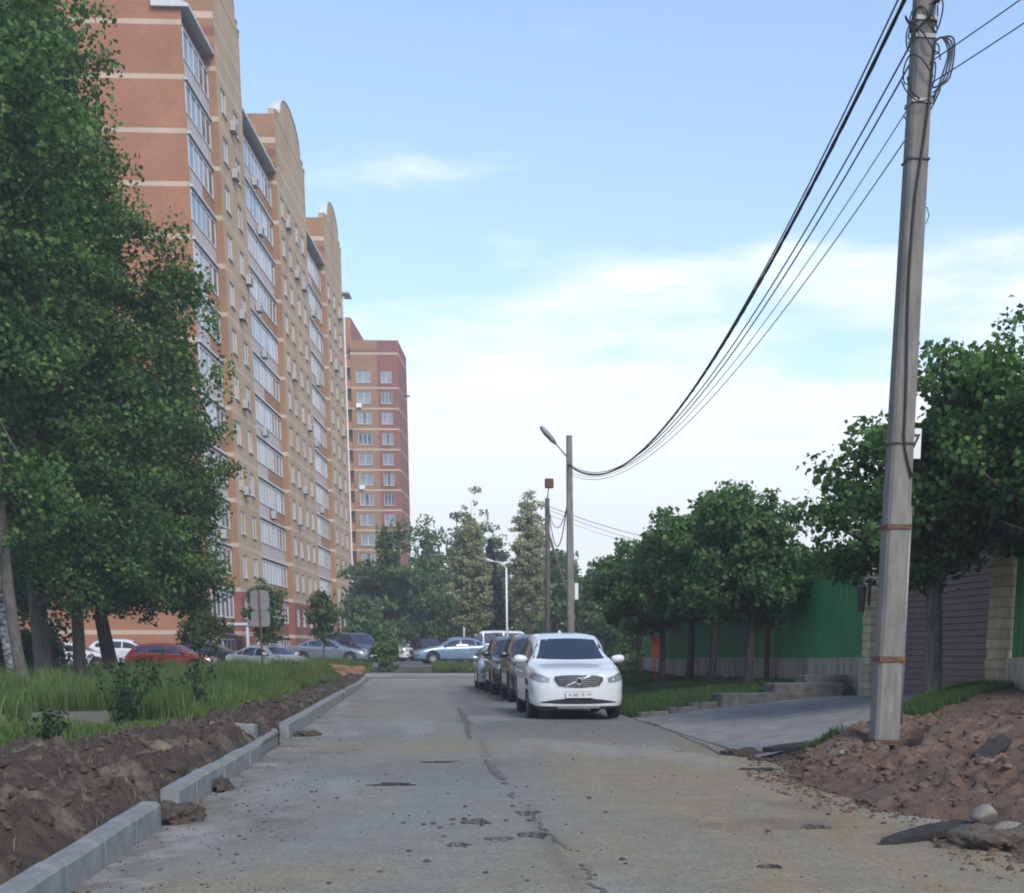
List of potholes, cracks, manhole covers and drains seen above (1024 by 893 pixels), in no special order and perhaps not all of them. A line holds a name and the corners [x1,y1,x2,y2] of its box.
crack [532,813,608,893]
crack [457,708,472,739]
crack [482,756,515,798]
